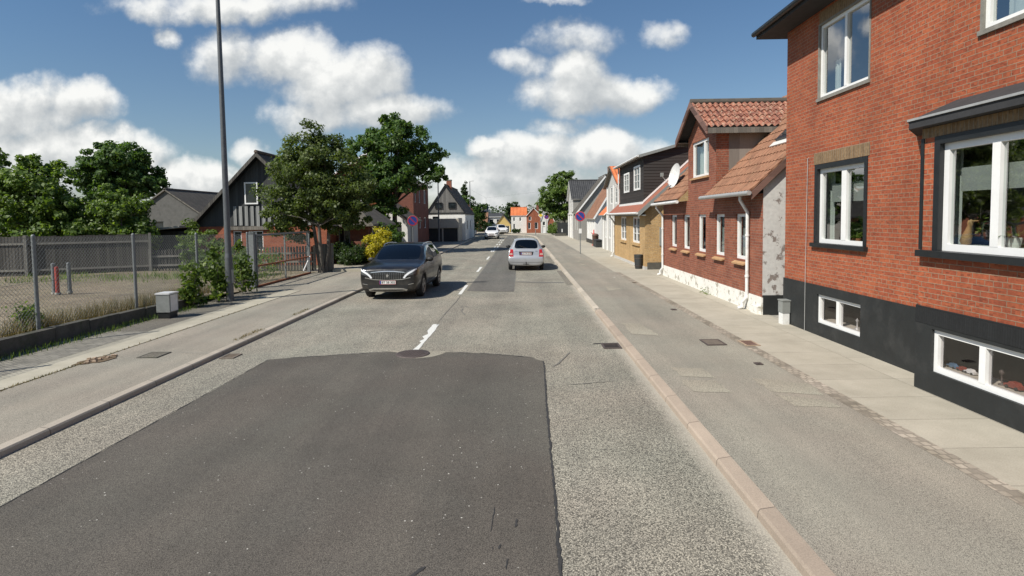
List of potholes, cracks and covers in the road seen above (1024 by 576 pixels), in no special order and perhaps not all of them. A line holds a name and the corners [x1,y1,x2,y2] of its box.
manhole cover [396,350,430,358]
